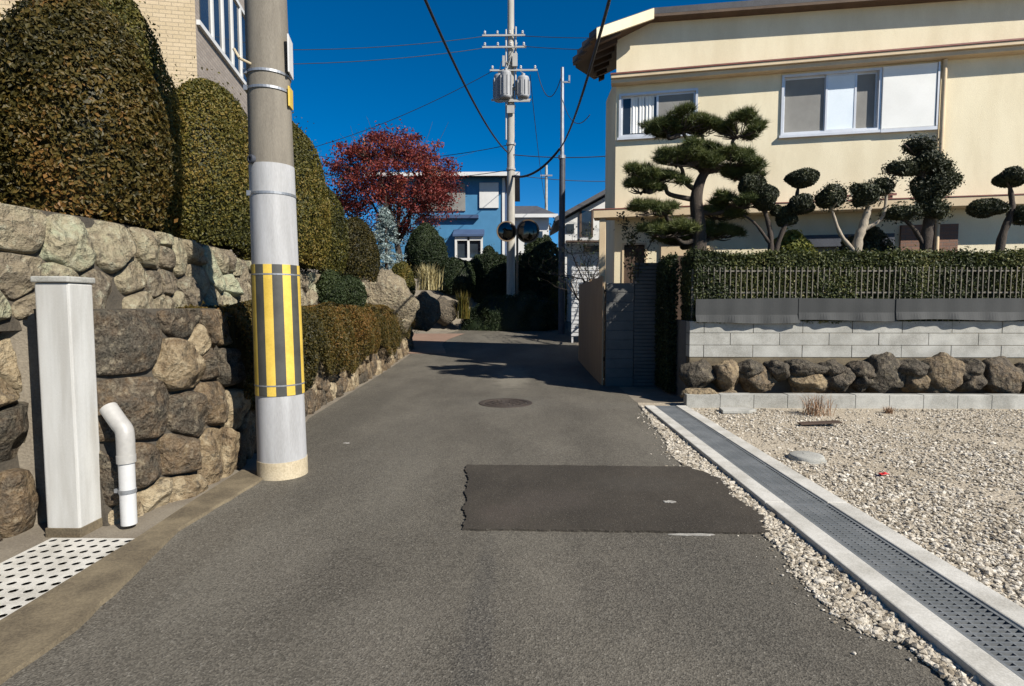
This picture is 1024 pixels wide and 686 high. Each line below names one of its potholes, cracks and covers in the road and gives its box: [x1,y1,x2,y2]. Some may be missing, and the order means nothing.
manhole cover [479,398,532,408]
